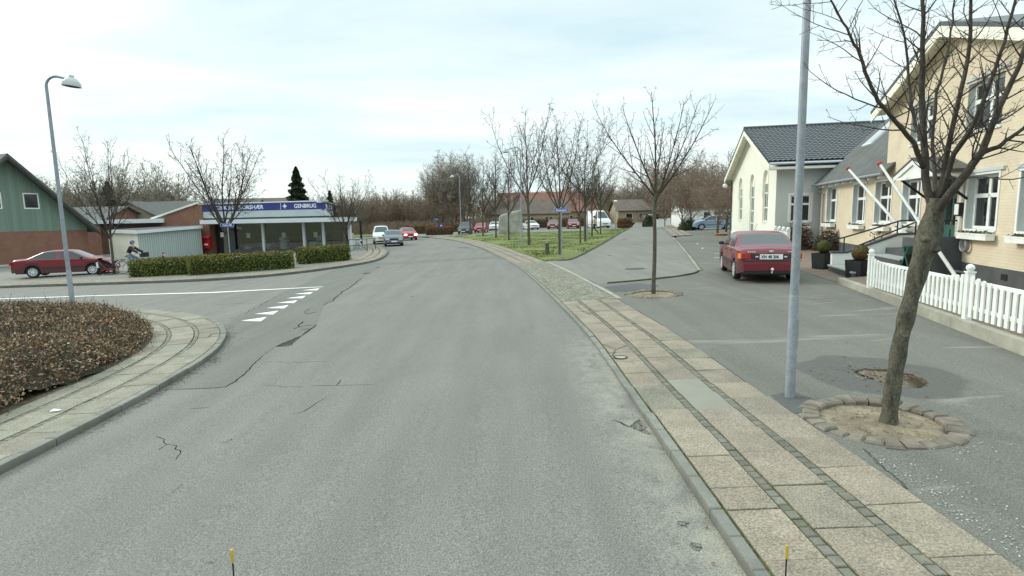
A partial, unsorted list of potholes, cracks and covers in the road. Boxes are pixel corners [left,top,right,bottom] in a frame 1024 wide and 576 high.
crack [294,279,361,336]
crack [864,449,907,488]
pothole [630,419,652,435]
crack [185,357,370,414]
pothole [854,368,929,388]
